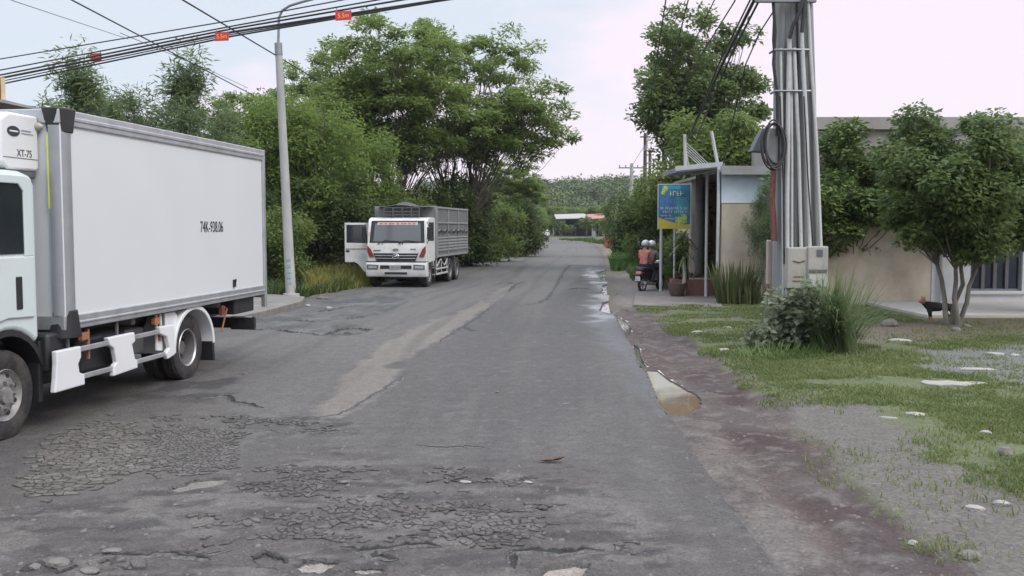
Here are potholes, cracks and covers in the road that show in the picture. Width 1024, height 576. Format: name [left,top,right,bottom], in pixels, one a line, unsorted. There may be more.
pothole [645,369,704,417]
pothole [616,316,632,334]
crack [12,372,645,574]
pothole [633,345,647,370]
